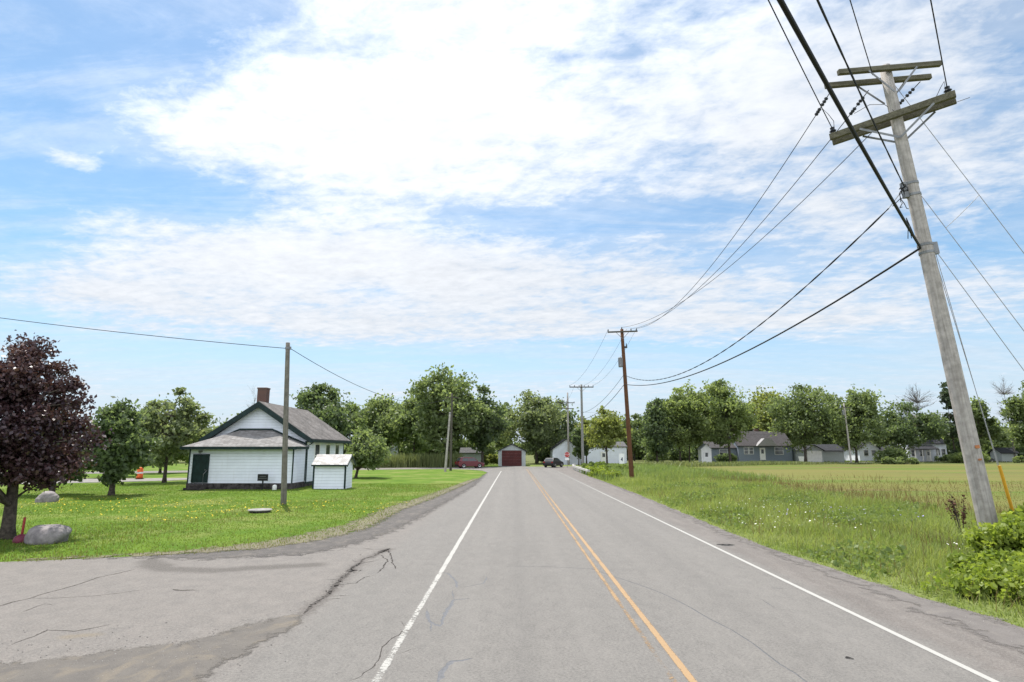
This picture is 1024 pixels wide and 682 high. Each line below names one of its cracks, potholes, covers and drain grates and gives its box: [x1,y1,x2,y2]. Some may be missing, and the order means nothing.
crack [14,625,106,644]
crack [1,569,137,611]
crack [353,623,411,680]
crack [437,658,472,682]
crack [425,572,487,629]
